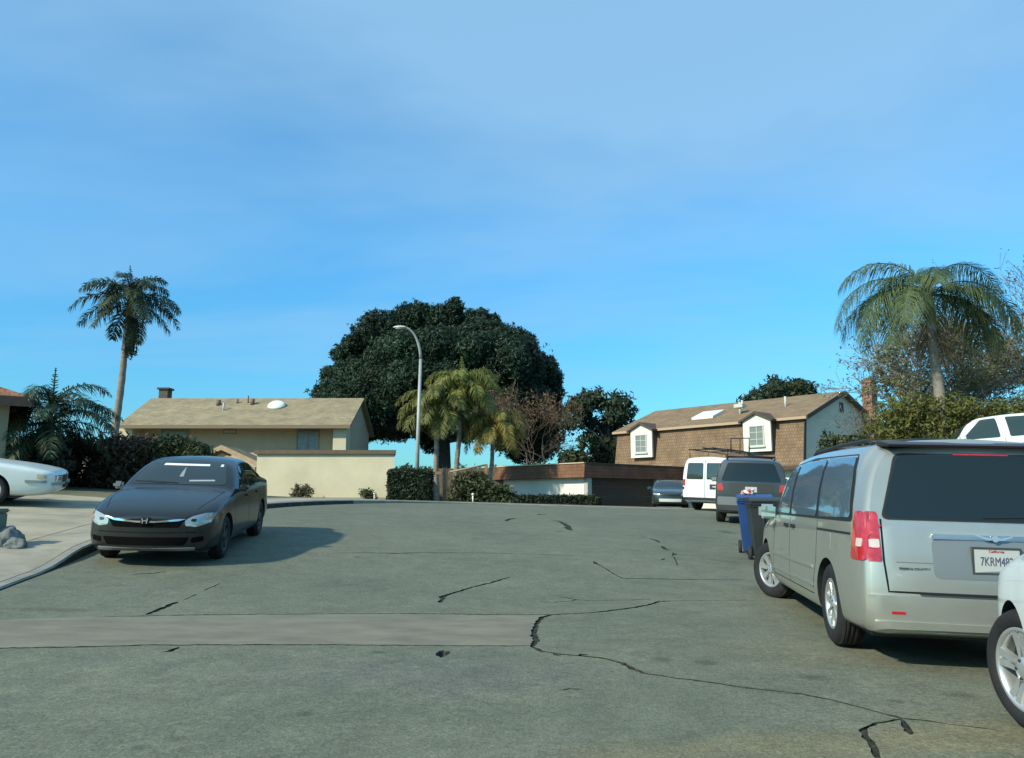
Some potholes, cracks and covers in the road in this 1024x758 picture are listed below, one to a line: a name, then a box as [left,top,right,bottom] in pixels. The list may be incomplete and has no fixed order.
crack [537,514,572,532]
crack [0,577,1001,758]
crack [593,537,742,580]
